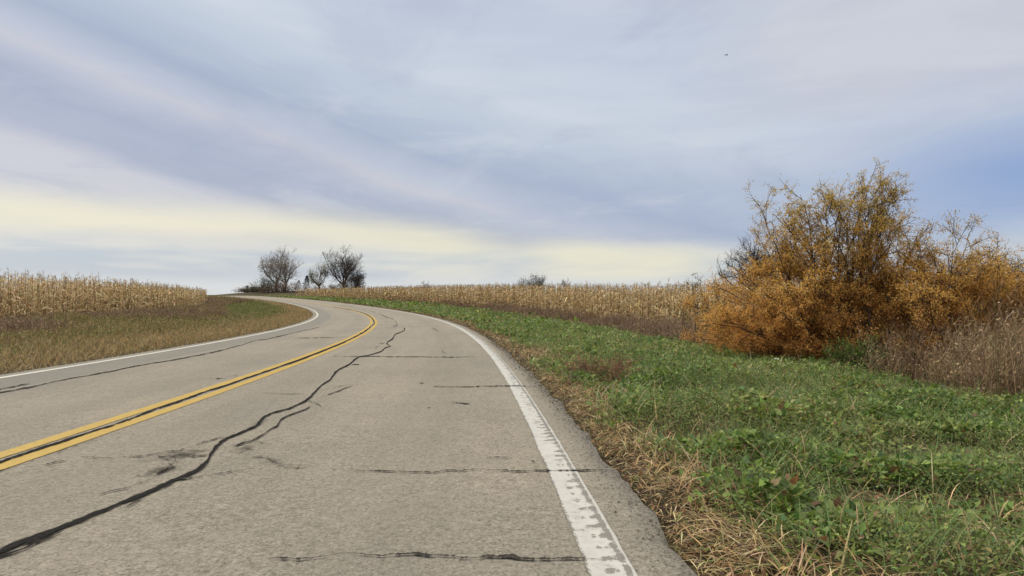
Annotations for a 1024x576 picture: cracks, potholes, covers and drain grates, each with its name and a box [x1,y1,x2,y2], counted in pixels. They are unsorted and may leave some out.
crack [0,305,595,560]
